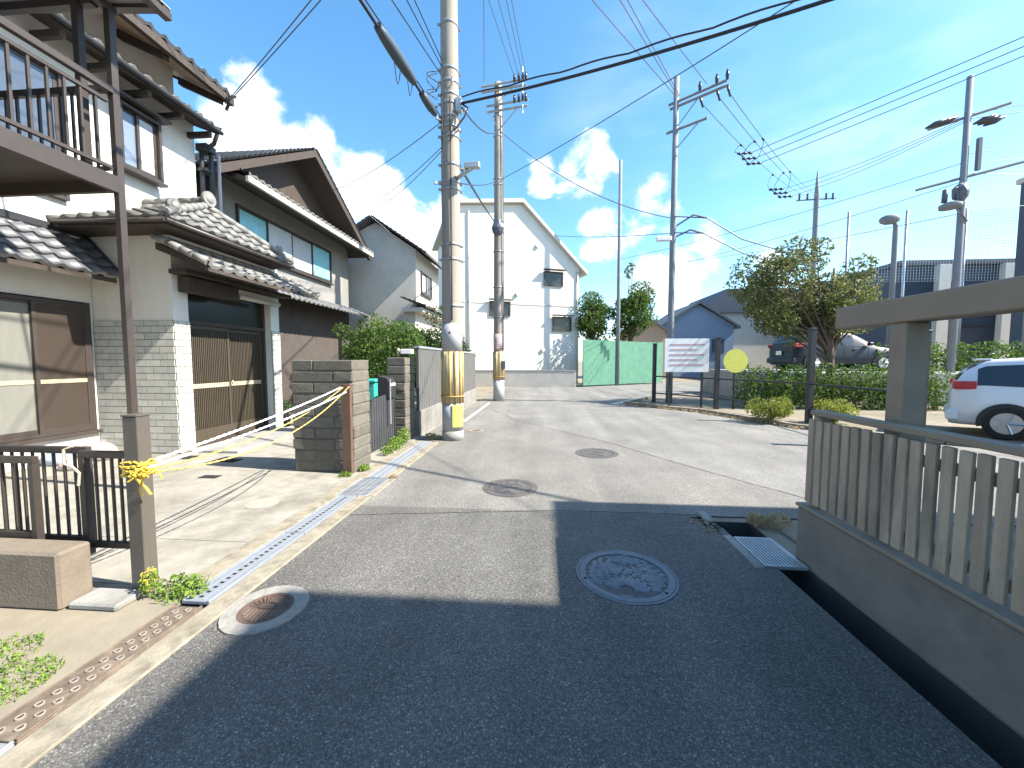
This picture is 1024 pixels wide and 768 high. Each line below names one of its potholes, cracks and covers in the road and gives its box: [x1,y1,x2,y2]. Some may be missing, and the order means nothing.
manhole cover [244,498,281,509]
manhole cover [218,585,310,636]
manhole cover [575,448,619,459]
manhole cover [483,479,538,497]
drain grate [733,536,809,571]
manhole cover [576,550,679,605]
drain grate [336,477,390,497]
